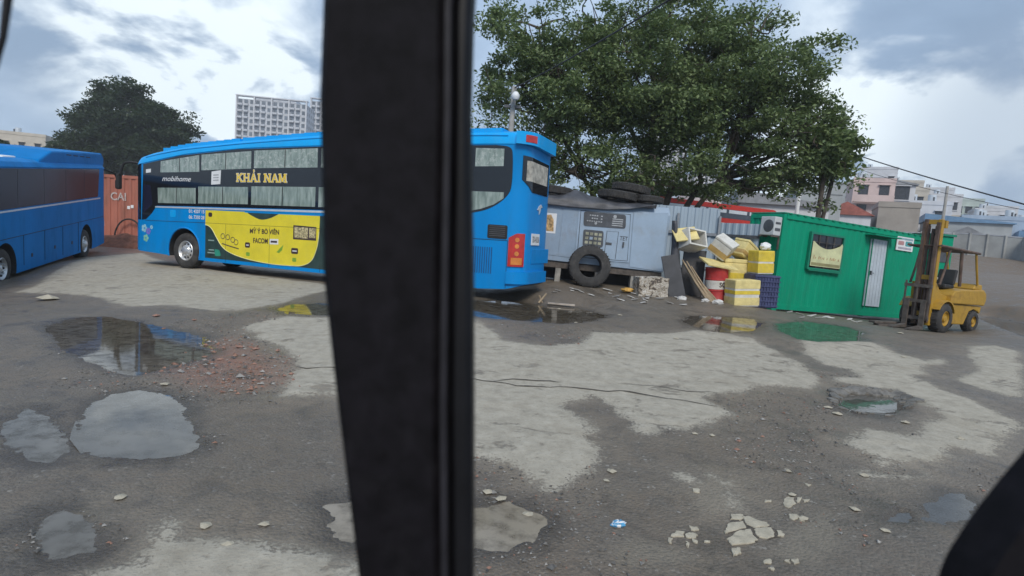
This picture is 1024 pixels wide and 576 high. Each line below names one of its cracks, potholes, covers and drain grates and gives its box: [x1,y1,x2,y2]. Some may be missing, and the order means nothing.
crack [724,514,785,557]
pothole [827,386,925,417]
